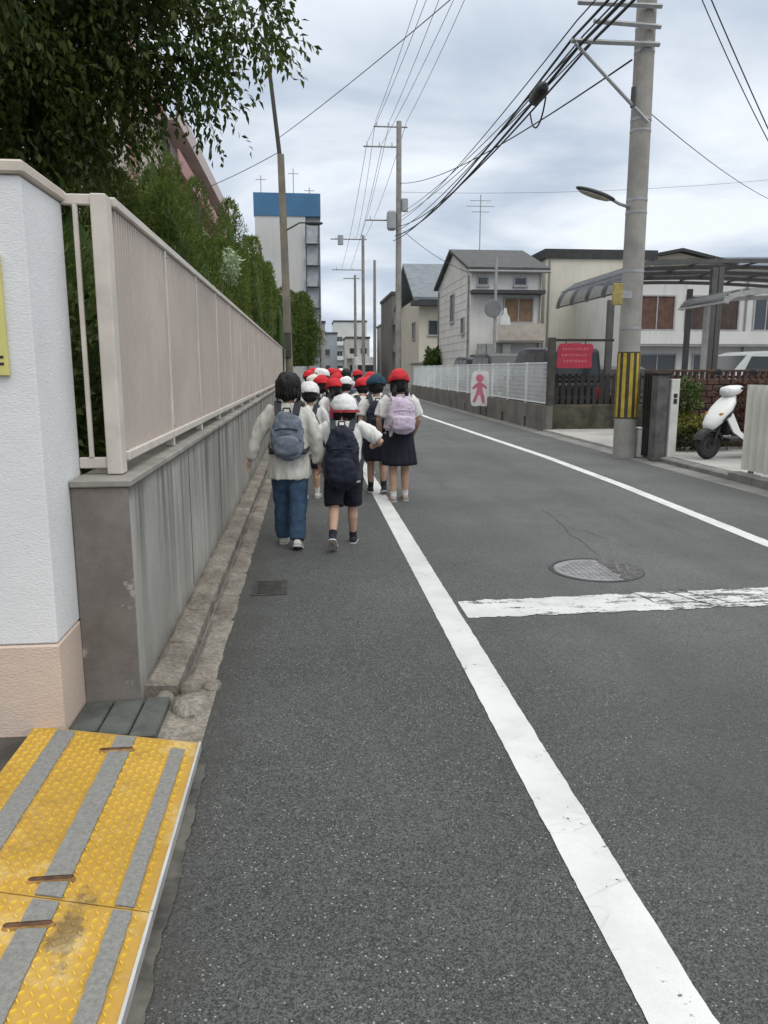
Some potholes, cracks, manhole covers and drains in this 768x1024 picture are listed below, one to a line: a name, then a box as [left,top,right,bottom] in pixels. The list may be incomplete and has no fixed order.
manhole cover [548,558,645,582]
